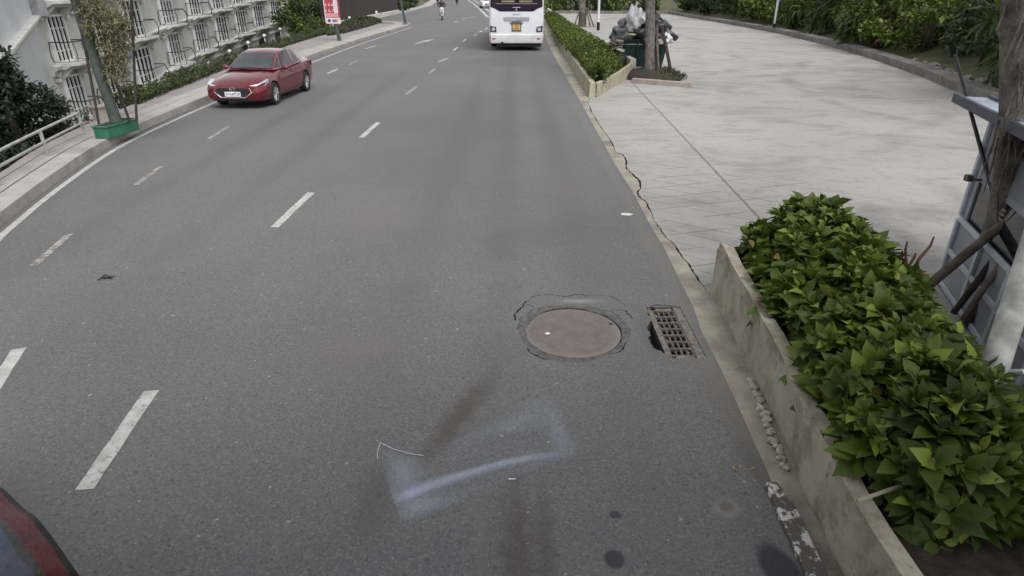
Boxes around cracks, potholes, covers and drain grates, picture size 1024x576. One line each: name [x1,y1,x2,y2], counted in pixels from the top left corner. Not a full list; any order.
drain grate [646,308,706,358]
pothole [647,321,665,353]
crack [588,103,706,290]
crack [513,294,680,366]
manhole cover [516,305,631,363]
